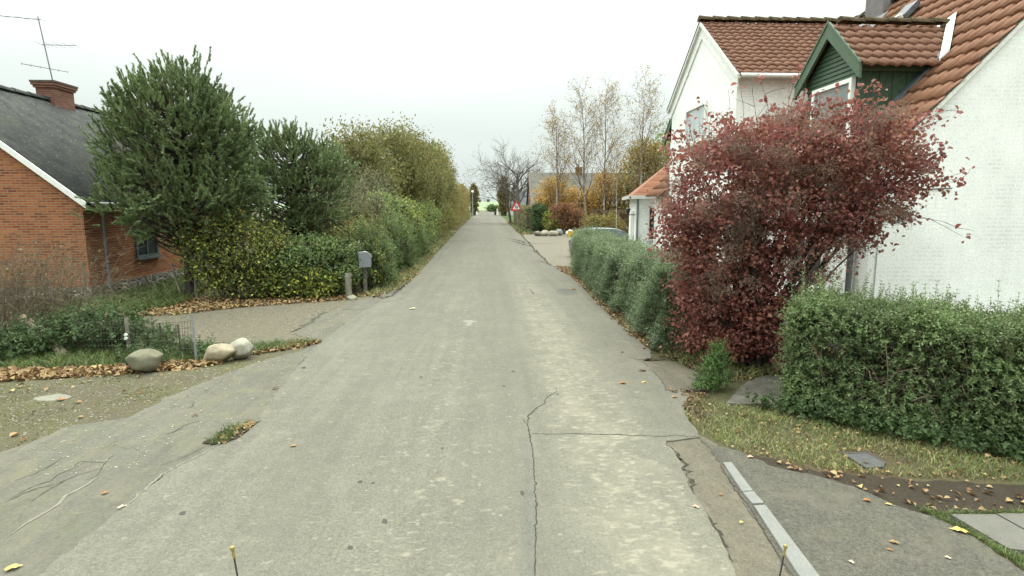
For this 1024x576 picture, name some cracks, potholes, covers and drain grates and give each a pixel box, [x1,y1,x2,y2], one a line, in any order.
crack [10,456,112,502]
pothole [202,416,258,444]
crack [522,387,697,493]
